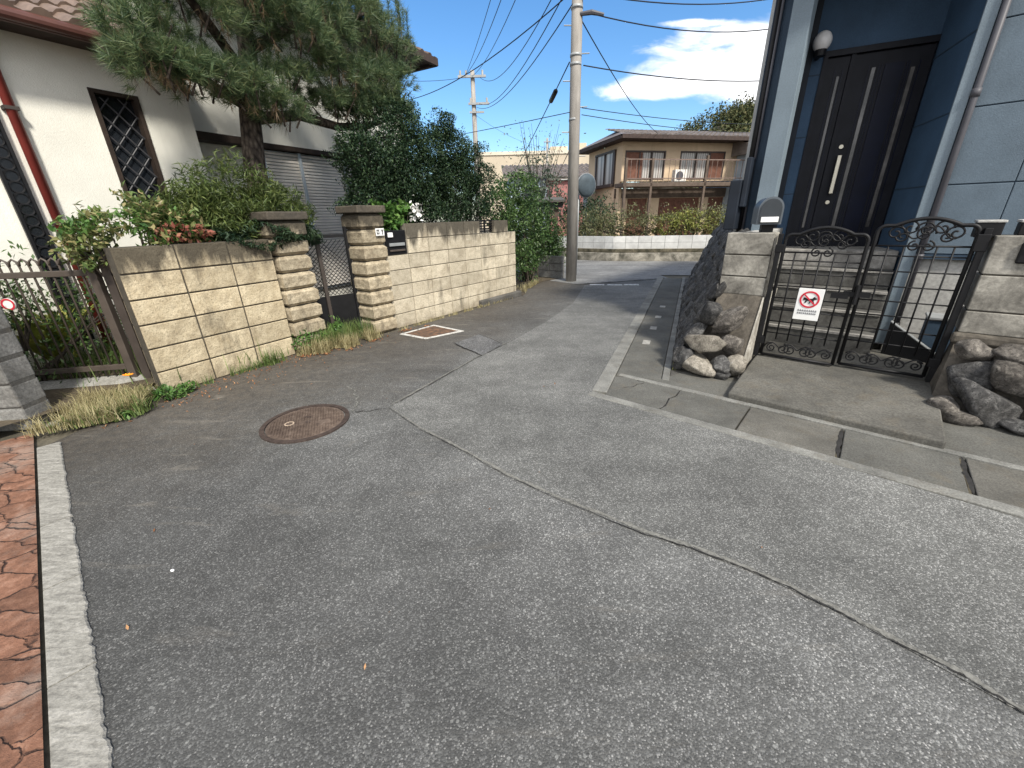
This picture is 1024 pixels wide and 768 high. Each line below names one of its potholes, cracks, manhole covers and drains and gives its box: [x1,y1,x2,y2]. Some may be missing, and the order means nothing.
utility cover [400,325,463,339]
manhole cover [259,404,350,444]
